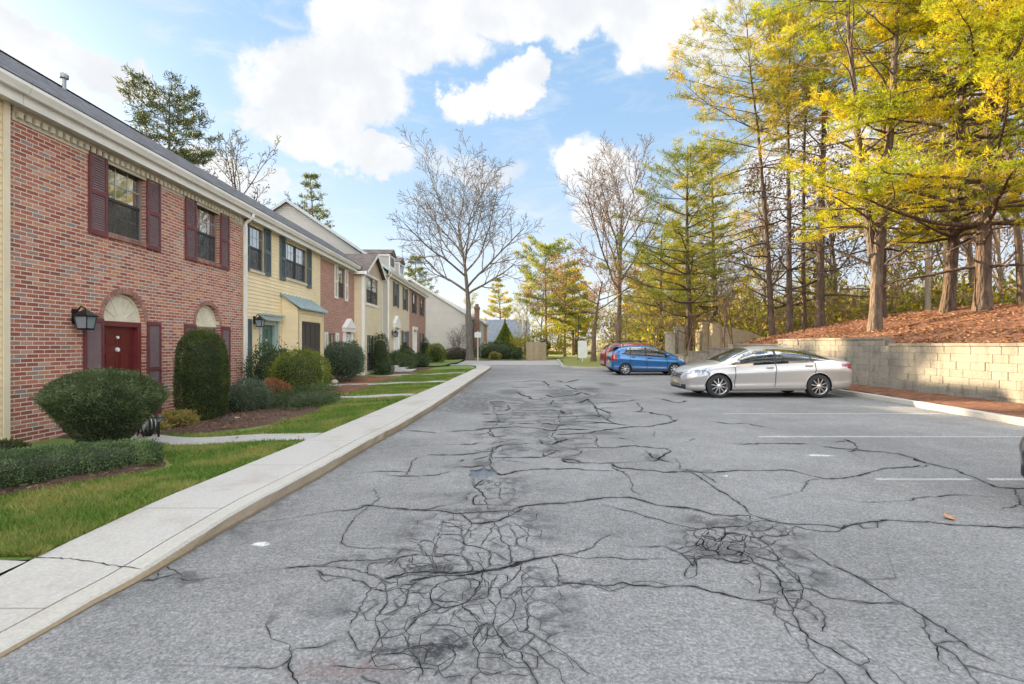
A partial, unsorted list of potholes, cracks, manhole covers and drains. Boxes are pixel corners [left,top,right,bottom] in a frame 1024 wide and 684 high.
crack [288,379,1024,684]
pothole [469,468,497,478]
